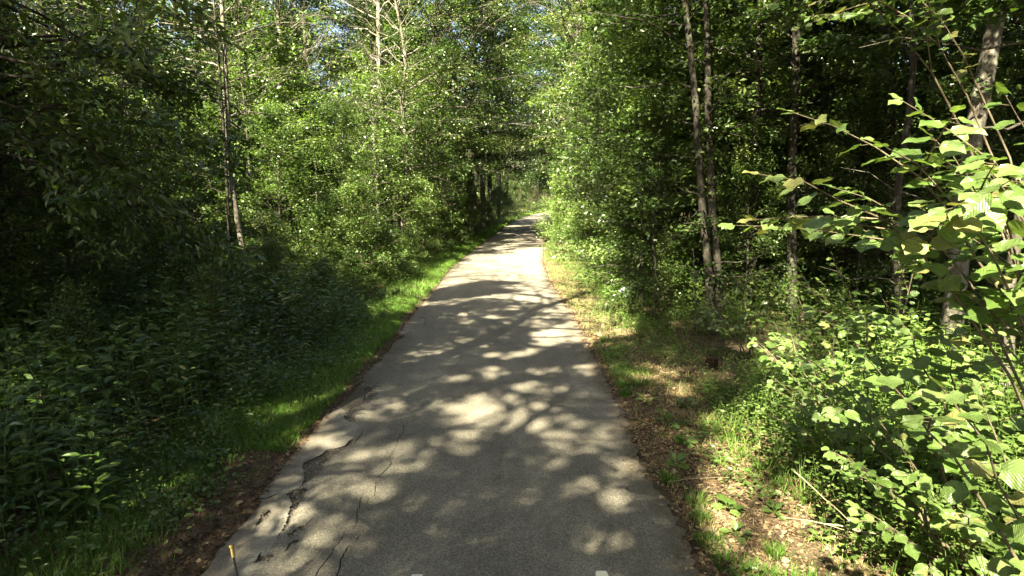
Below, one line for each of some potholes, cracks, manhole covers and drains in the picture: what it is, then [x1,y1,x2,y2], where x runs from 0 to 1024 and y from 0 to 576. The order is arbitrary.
crack [316,422,405,576]
